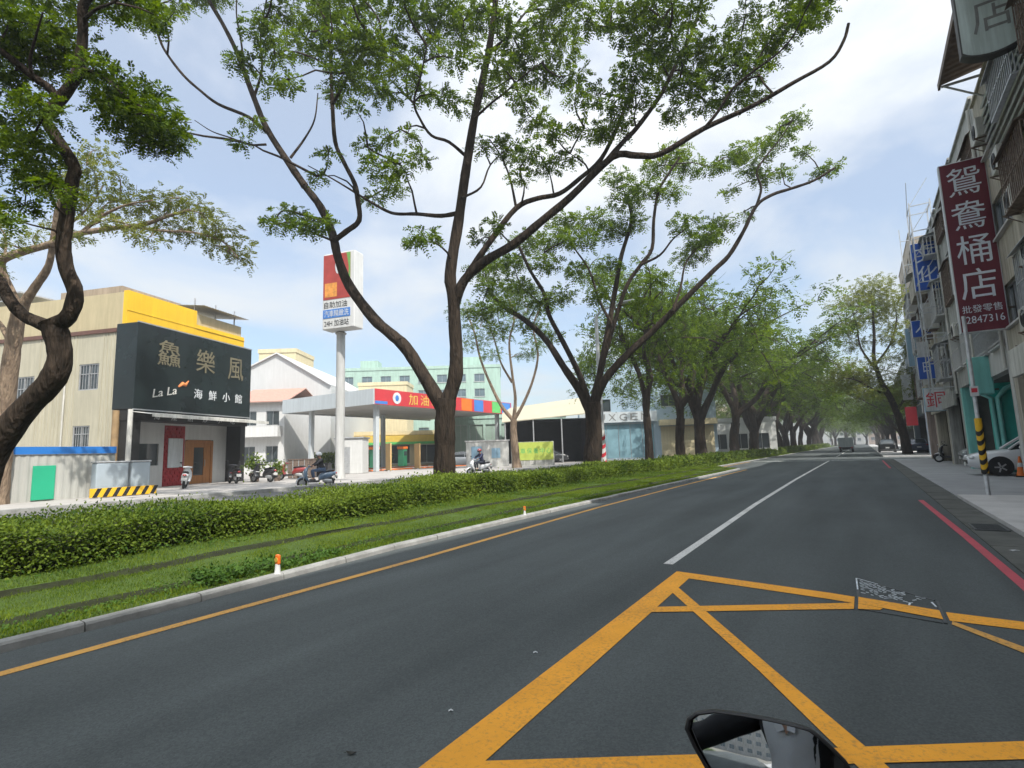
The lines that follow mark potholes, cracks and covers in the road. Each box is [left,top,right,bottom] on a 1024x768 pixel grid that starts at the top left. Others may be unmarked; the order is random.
manhole cover [855,578,947,624]
drain grate [967,523,1011,532]
